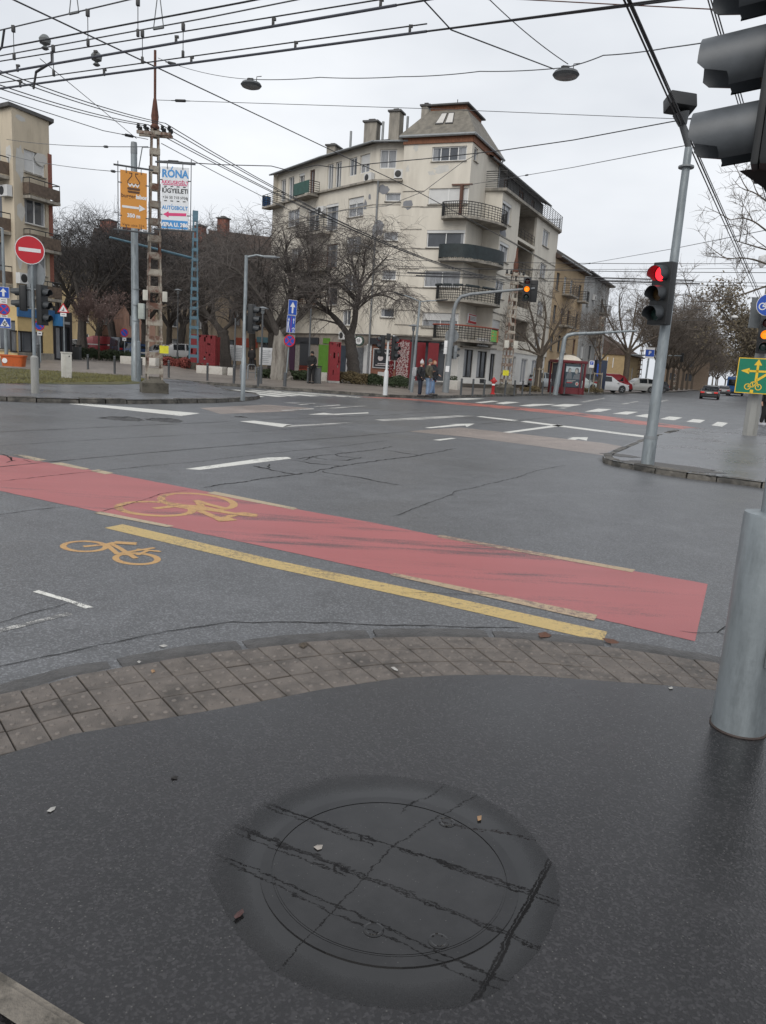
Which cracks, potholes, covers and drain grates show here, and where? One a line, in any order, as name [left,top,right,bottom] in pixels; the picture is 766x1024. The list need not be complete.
crack [3,440,456,487]
crack [1,621,521,666]
manhole cover [260,797,519,968]
